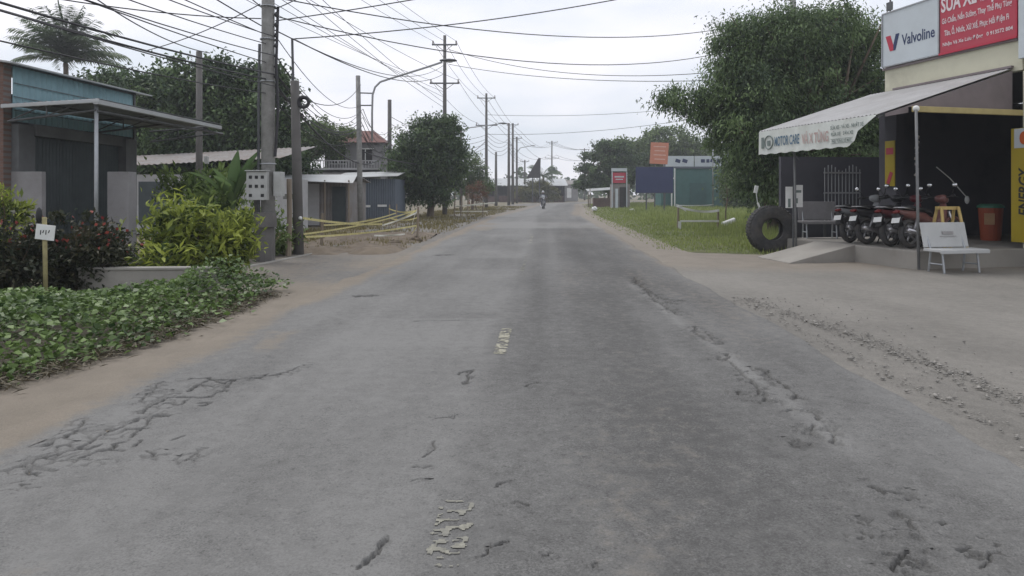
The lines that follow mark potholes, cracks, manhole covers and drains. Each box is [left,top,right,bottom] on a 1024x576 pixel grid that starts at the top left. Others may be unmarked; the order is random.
crack [483,478,540,511]
crack [429,413,462,422]
crack [0,361,317,495]
crack [343,533,399,576]
crack [401,439,443,485]
crack [450,368,483,388]
